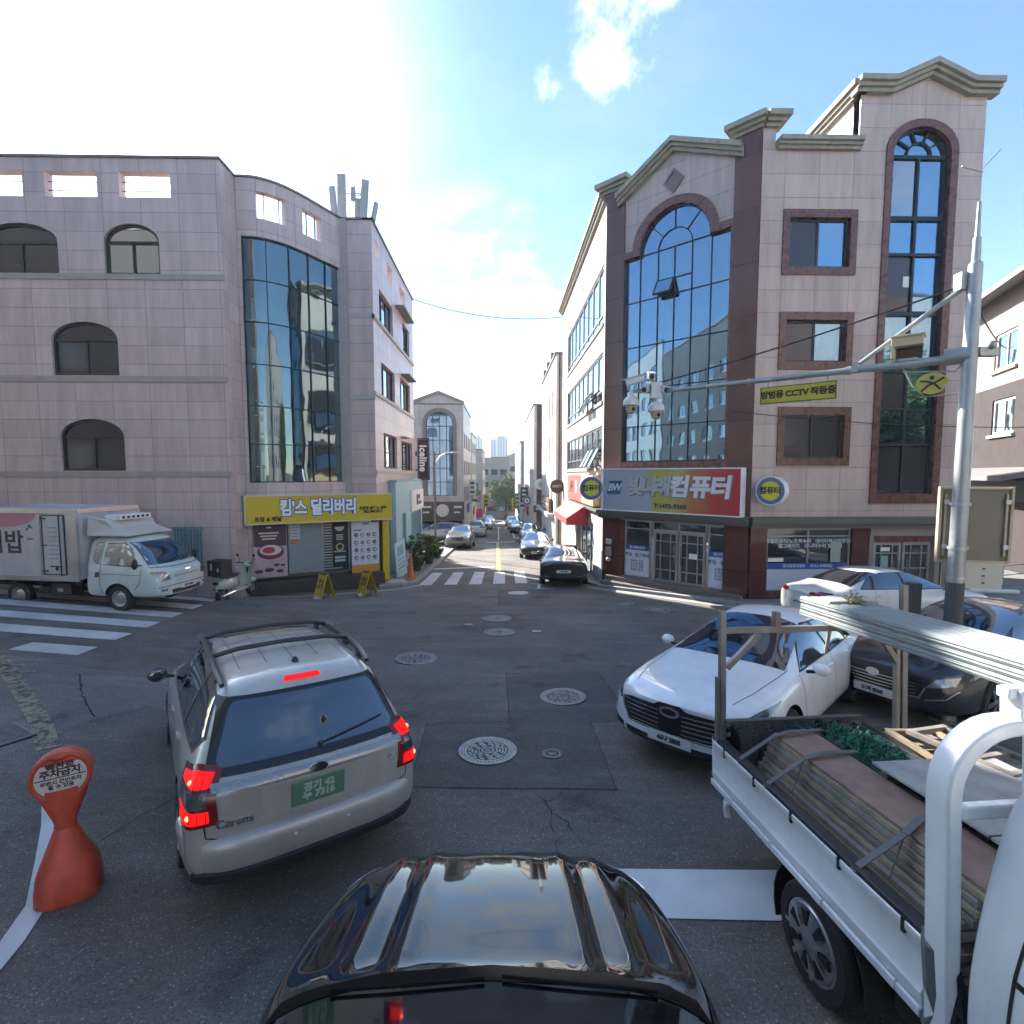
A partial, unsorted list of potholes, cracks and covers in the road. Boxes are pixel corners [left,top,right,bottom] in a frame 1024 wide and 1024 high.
manhole cover [395,652,437,665]
manhole cover [542,748,562,759]
crack [533,791,574,852]
drain grate [0,722,37,747]
manhole cover [484,628,515,636]
manhole cover [540,688,586,706]
manhole cover [458,737,517,766]
